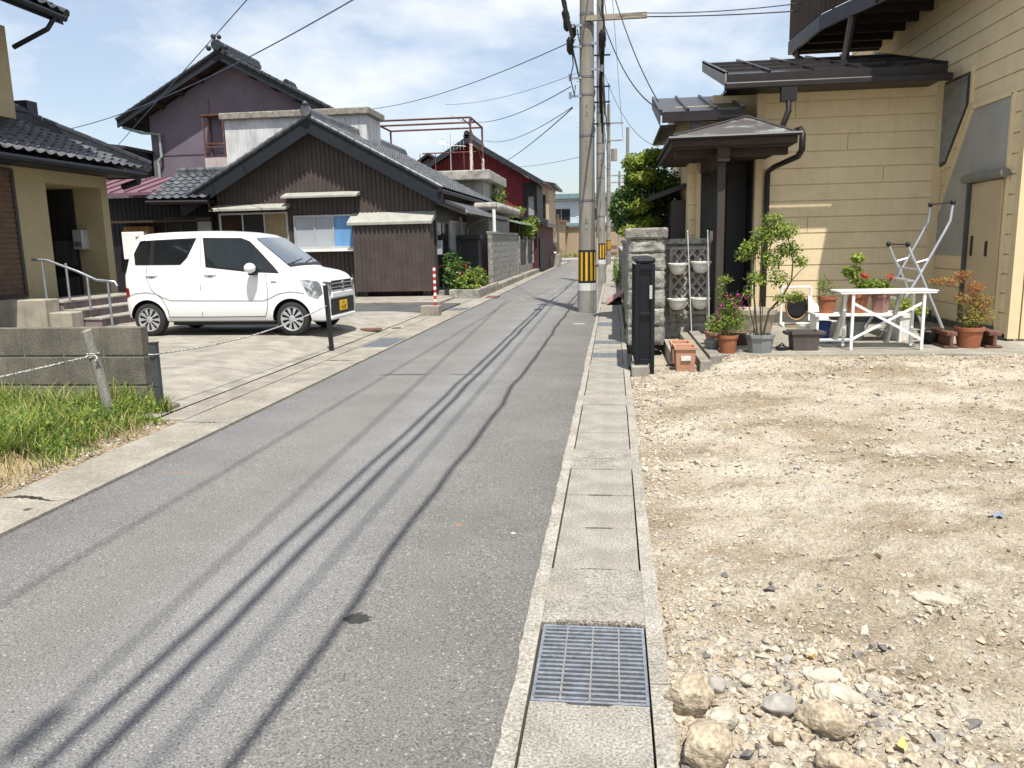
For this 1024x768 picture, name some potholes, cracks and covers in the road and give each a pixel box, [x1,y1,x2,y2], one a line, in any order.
drain grate [530,624,651,718]
